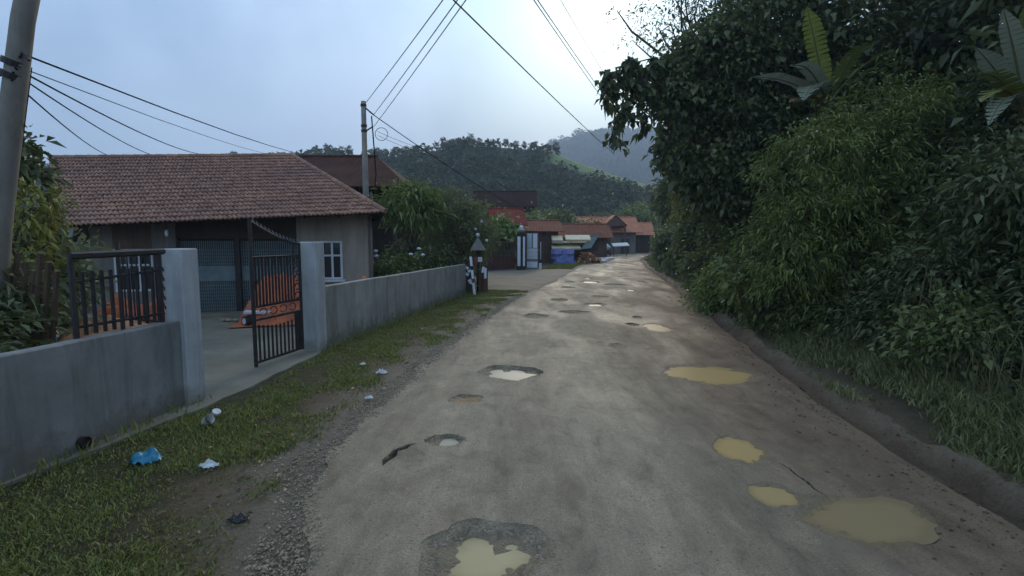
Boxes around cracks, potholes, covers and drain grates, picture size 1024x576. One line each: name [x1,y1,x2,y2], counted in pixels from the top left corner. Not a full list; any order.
pothole [447,394,484,403]
pothole [660,364,765,386]
pothole [747,481,803,507]
crack [779,463,827,497]
pothole [710,434,770,464]
pothole [477,365,544,381]
pothole [642,323,674,332]
pothole [418,518,558,576]
pothole [425,434,467,446]
pothole [795,494,943,549]
